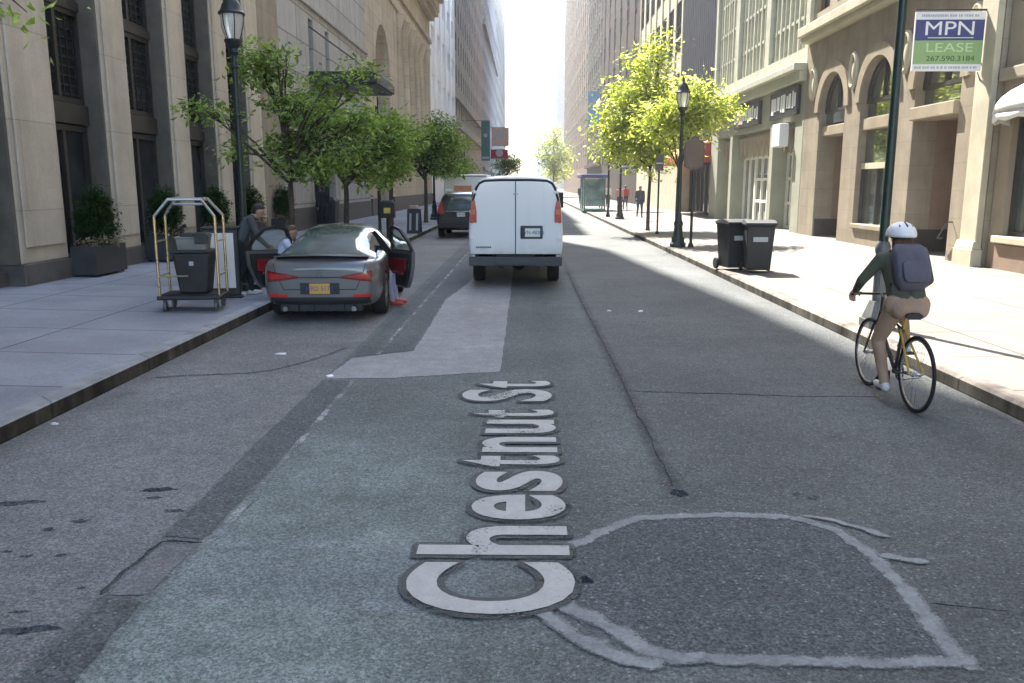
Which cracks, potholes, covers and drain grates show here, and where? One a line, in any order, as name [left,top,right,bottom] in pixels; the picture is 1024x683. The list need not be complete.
pothole [0,624,62,635]
pothole [669,489,689,497]
crack [155,348,347,379]
crack [567,272,872,487]
